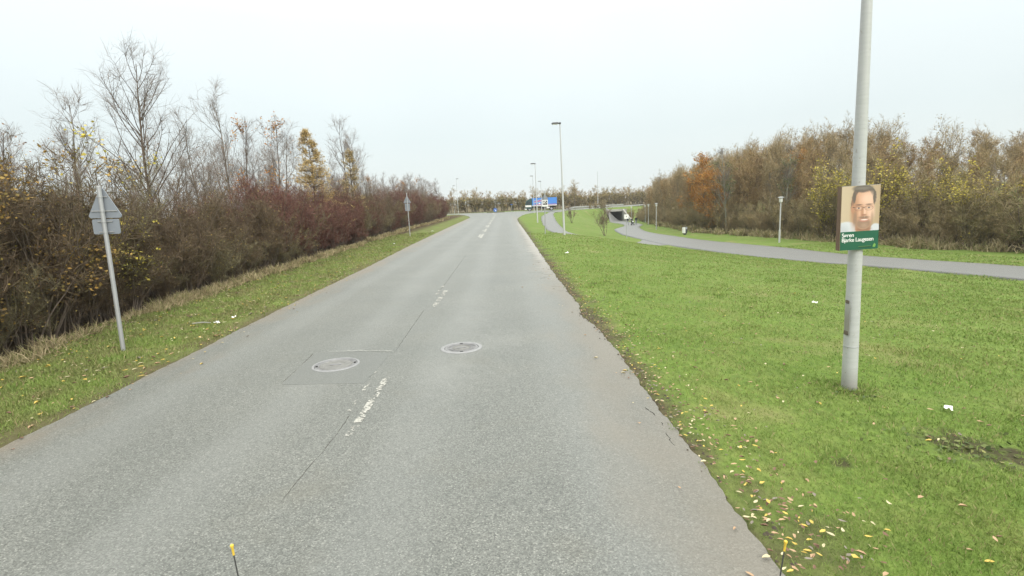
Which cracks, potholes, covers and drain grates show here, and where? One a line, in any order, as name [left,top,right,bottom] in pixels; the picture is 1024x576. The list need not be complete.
manhole cover [311,357,360,372]
manhole cover [441,342,482,354]
